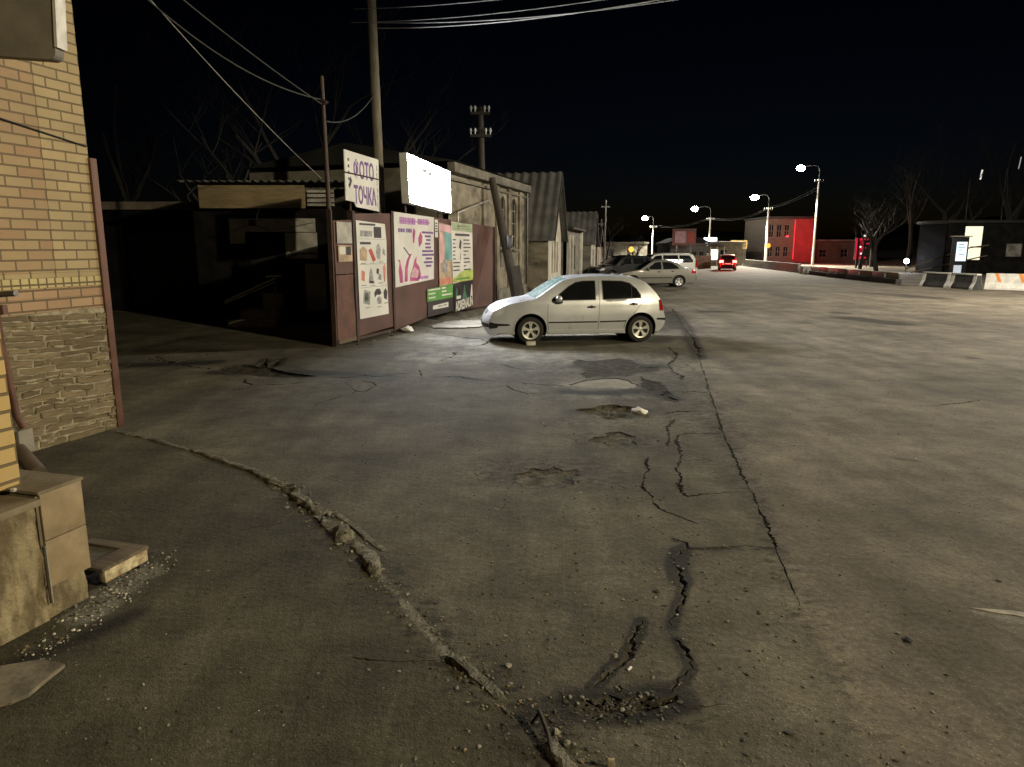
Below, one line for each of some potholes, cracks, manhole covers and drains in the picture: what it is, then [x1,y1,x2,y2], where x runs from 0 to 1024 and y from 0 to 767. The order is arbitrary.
crack [639,411,776,709]
crack [591,621,643,690]
pothole [576,404,640,420]
pothole [588,432,637,449]
crack [667,348,707,393]
pothole [569,694,679,721]
pothole [512,466,580,489]
pothole [569,378,638,389]
